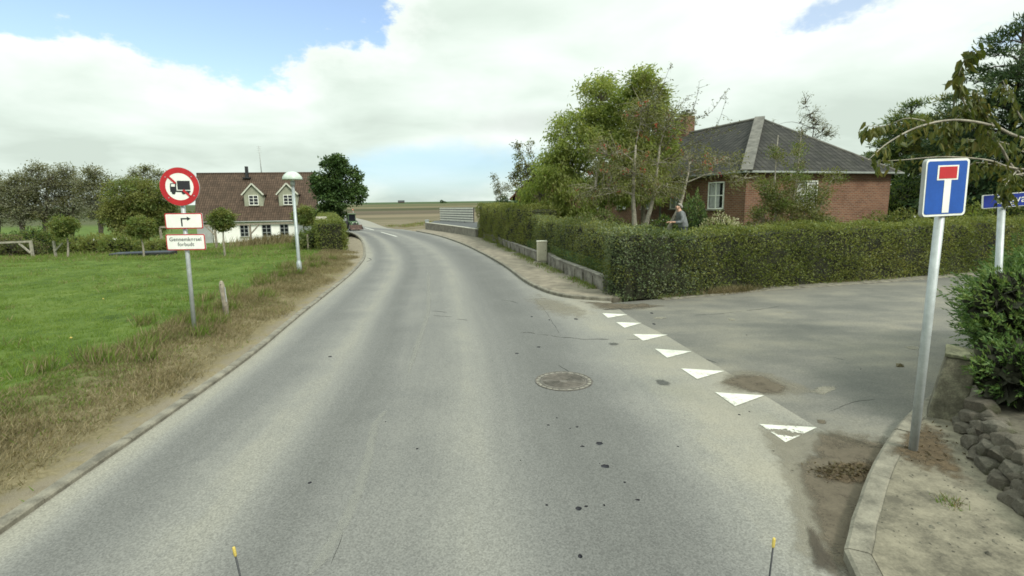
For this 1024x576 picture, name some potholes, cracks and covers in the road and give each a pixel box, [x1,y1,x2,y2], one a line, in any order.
manhole cover [535,371,593,391]
